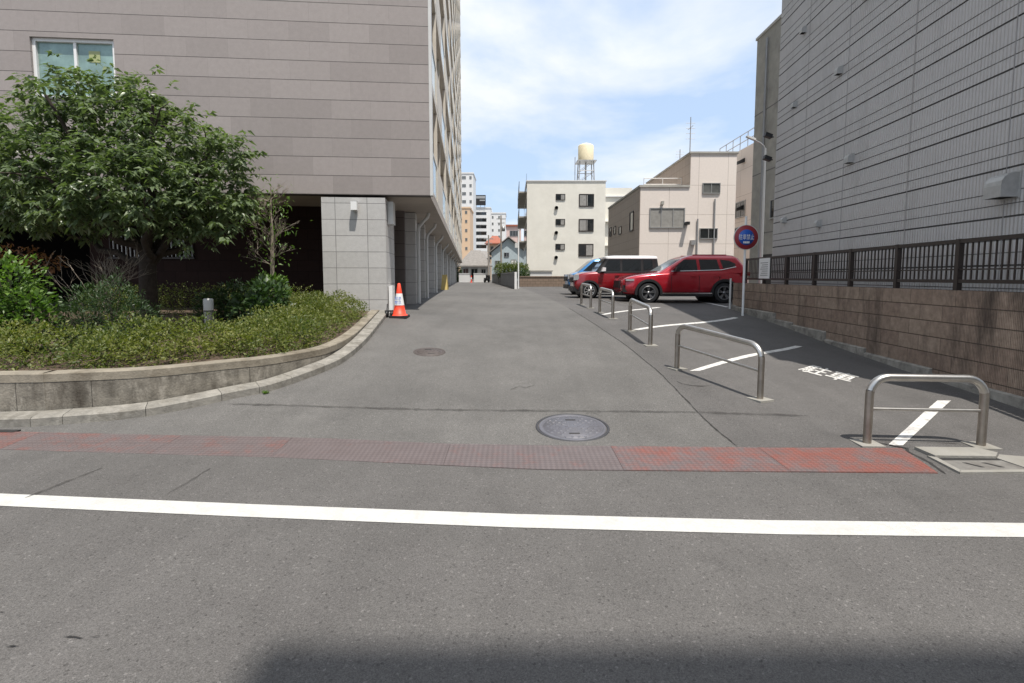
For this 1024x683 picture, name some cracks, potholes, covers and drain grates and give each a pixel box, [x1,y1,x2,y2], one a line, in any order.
manhole cover [413,348,446,356]
manhole cover [536,414,610,442]
